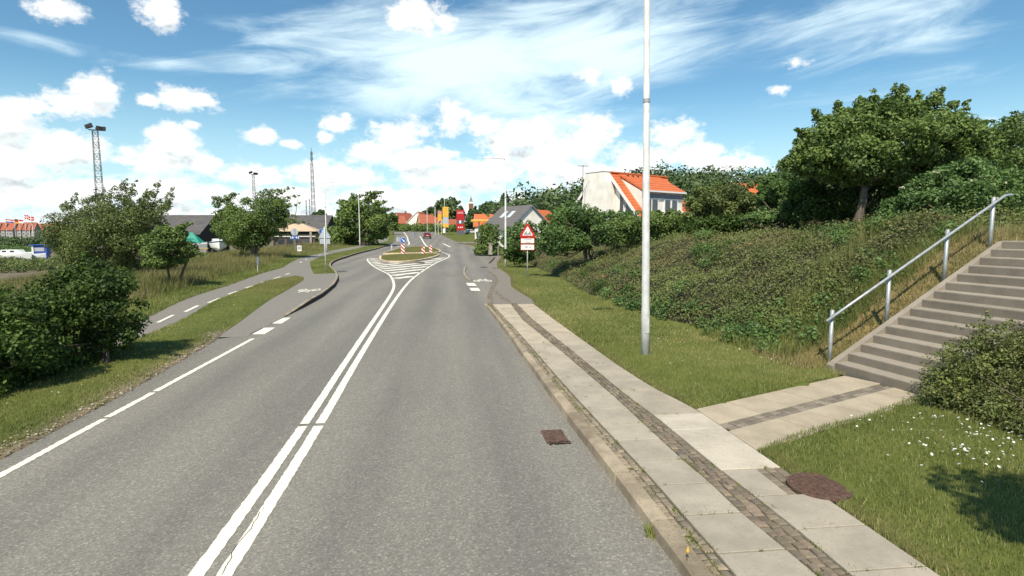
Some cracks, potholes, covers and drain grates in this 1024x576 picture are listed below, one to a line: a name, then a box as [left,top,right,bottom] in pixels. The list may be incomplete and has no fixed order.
manhole cover [786,472,854,503]
